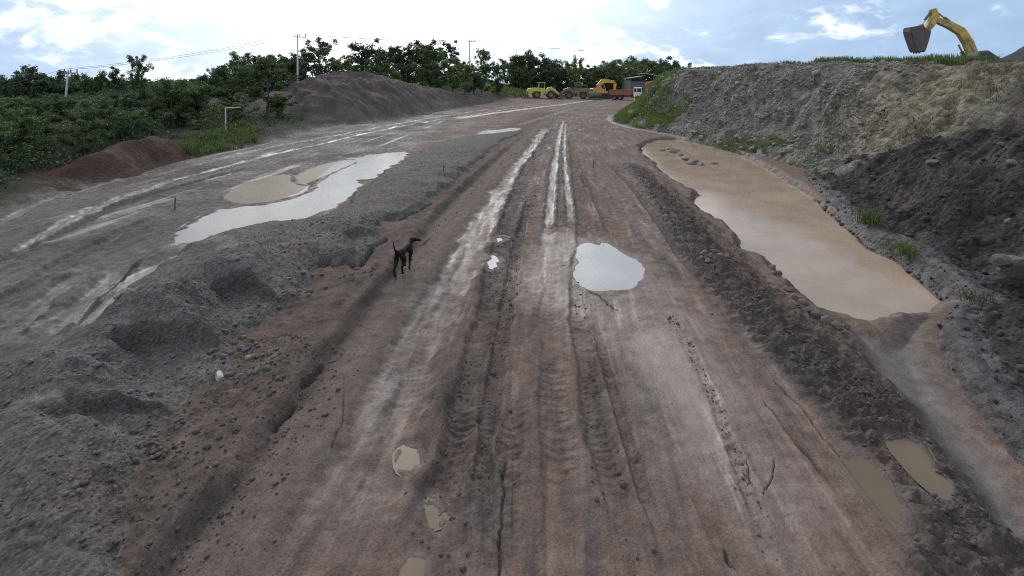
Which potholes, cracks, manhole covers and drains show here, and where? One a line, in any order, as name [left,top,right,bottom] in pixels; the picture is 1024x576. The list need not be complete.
crack [762,381,902,535]
pothole [483,253,503,271]
crack [497,462,507,576]
pothole [570,242,649,293]
pothole [416,496,450,531]
pothole [392,444,423,477]
pothole [396,554,434,576]
pothole [839,450,918,536]
pothole [885,435,958,502]
